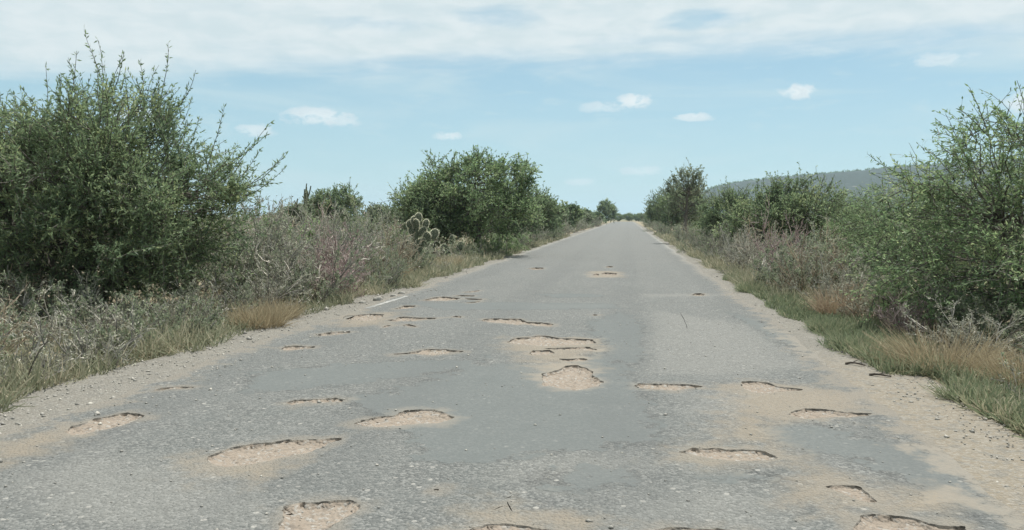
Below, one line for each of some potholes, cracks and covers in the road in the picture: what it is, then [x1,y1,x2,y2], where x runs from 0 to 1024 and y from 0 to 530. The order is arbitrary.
pothole [741,381,803,393]
pothole [635,383,703,391]
pothole [278,500,360,530]
pothole [207,438,342,467]
pothole [64,413,144,435]
pothole [541,365,604,390]
pothole [507,336,596,346]
pothole [481,318,554,326]
pothole [853,514,966,530]
pothole [354,409,454,427]
pothole [679,448,778,461]
